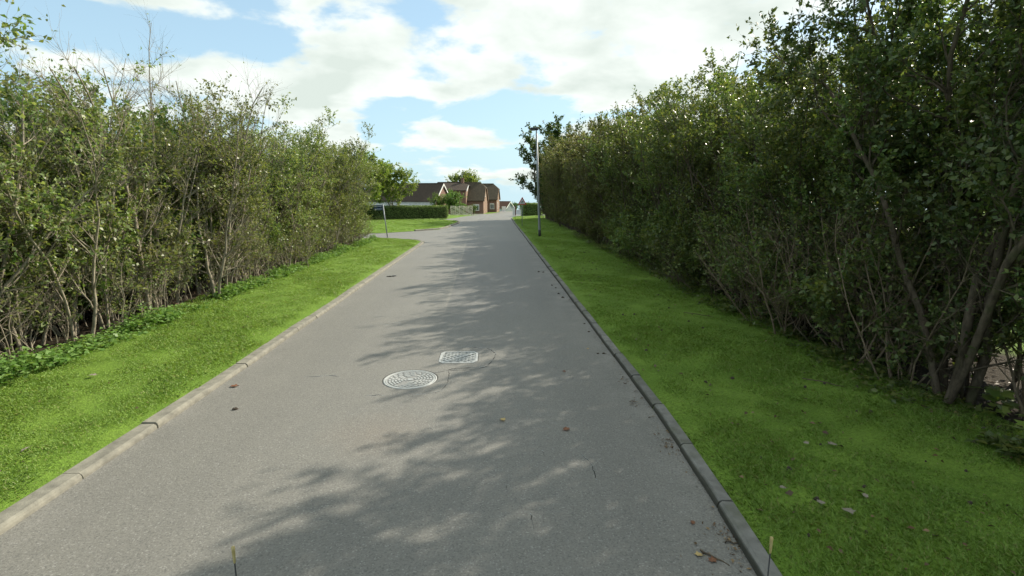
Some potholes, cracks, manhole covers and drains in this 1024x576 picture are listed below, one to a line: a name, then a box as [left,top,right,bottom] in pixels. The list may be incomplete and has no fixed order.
manhole cover [382,370,438,389]
